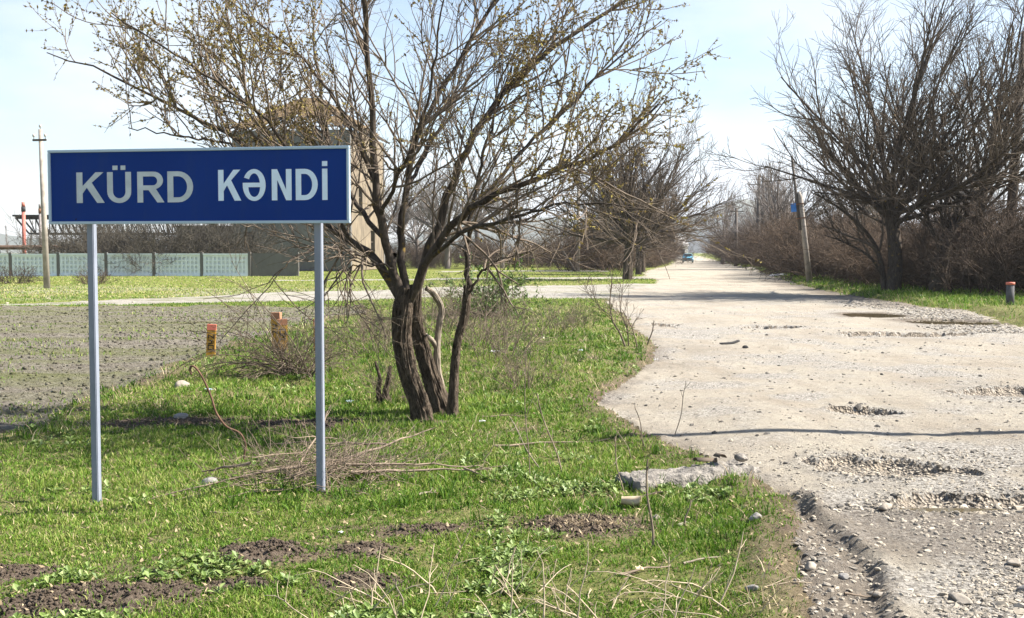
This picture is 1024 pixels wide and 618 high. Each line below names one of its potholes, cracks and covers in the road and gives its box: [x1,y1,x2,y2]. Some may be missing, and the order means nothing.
pothole [825,405,905,416]
pothole [946,386,1024,398]
pothole [800,455,986,477]
pothole [889,491,1024,514]
